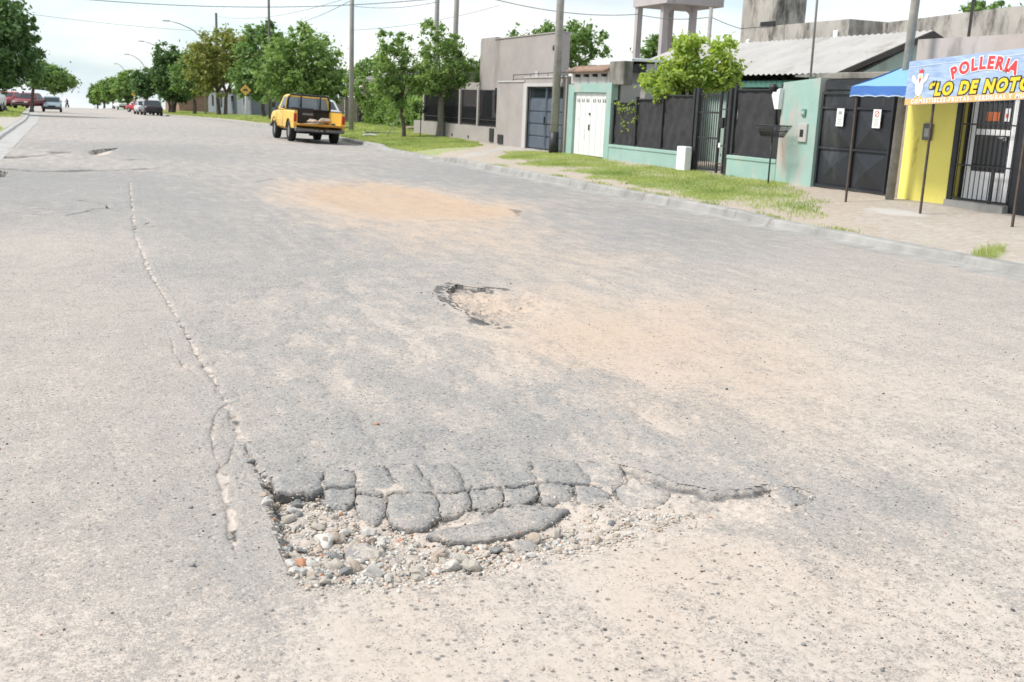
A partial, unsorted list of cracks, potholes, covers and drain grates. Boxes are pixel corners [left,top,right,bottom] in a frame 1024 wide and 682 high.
pothole [433,282,576,329]
crack [0,145,290,557]
pothole [78,148,123,156]
pothole [231,438,832,606]
